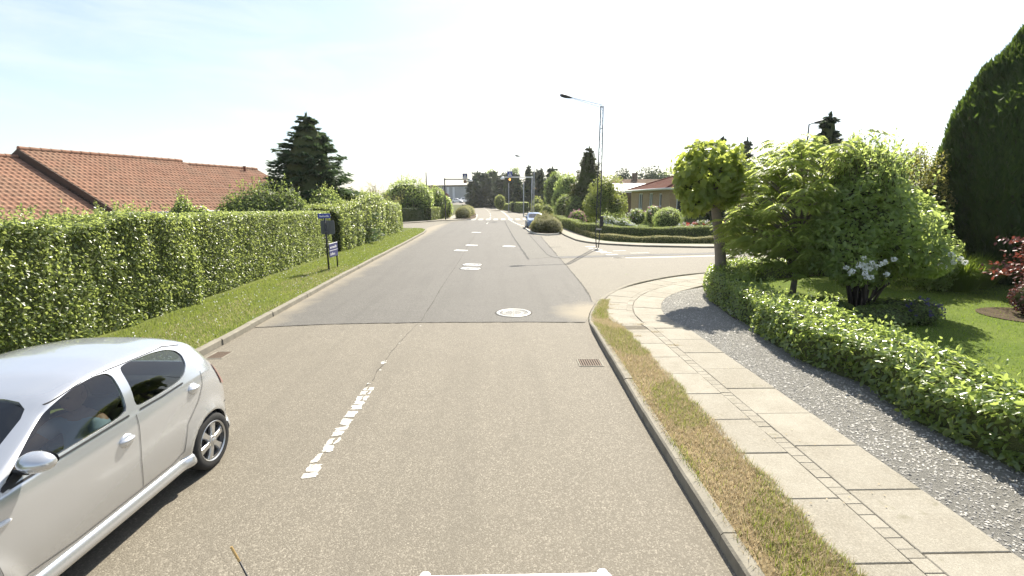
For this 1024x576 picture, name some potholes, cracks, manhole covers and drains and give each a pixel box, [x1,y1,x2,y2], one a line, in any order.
drain grate [576,359,605,367]
manhole cover [495,308,532,317]
drain grate [205,351,235,359]
